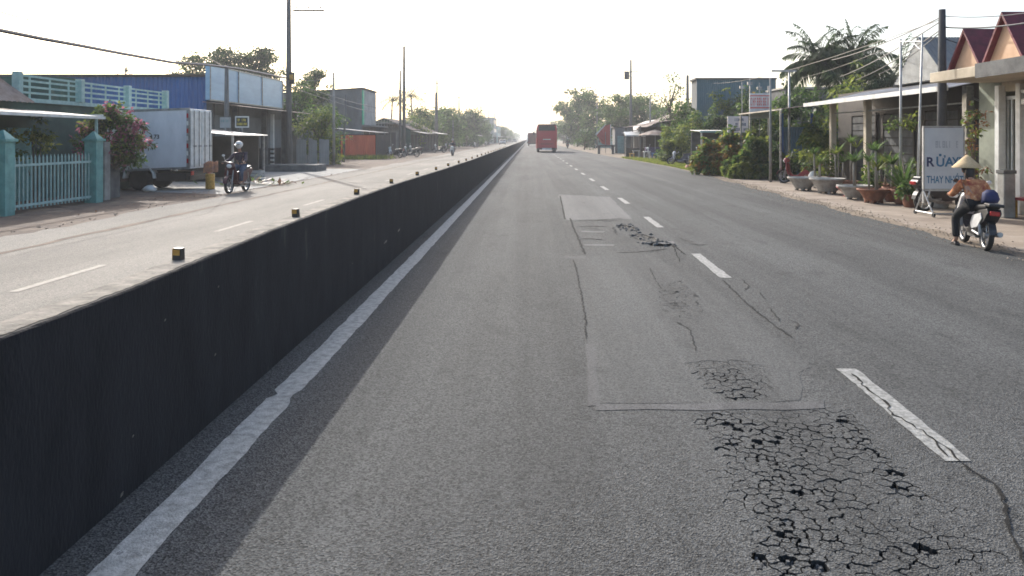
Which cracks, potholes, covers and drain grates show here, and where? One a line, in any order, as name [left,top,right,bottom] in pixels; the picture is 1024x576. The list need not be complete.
pothole [629,231,662,246]
pothole [616,223,639,232]
crack [559,196,1024,576]
